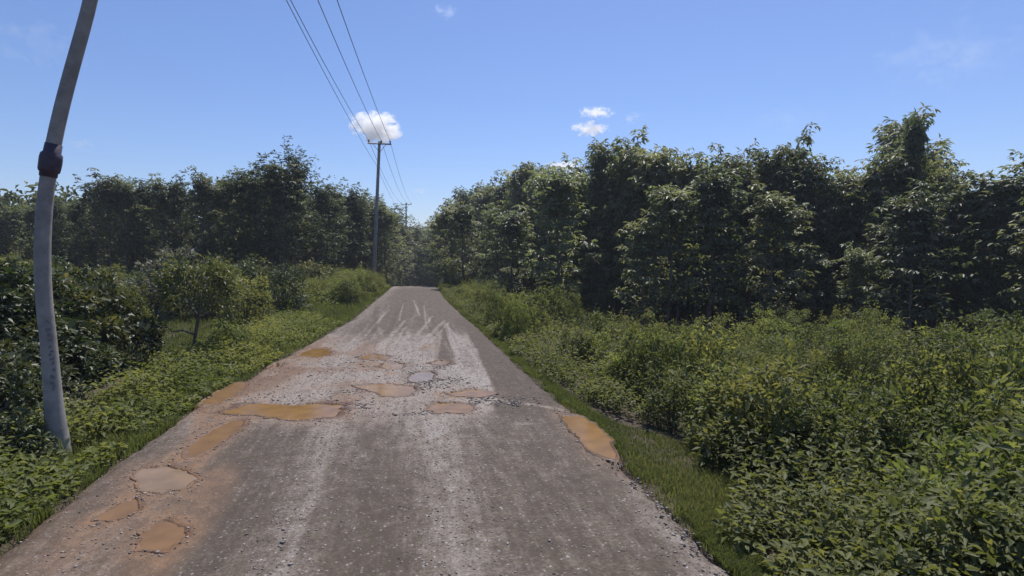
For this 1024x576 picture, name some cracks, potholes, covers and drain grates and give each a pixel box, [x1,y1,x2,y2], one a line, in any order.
pothole [194,382,248,409]
pothole [442,388,499,398]
pothole [218,401,354,421]
pothole [133,517,190,554]
pothole [559,413,621,468]
pothole [295,348,334,358]
pothole [424,401,476,414]
pothole [129,463,201,494]
pothole [90,496,143,522]
pothole [351,383,421,397]
pothole [355,353,392,361]
pothole [181,416,250,460]
